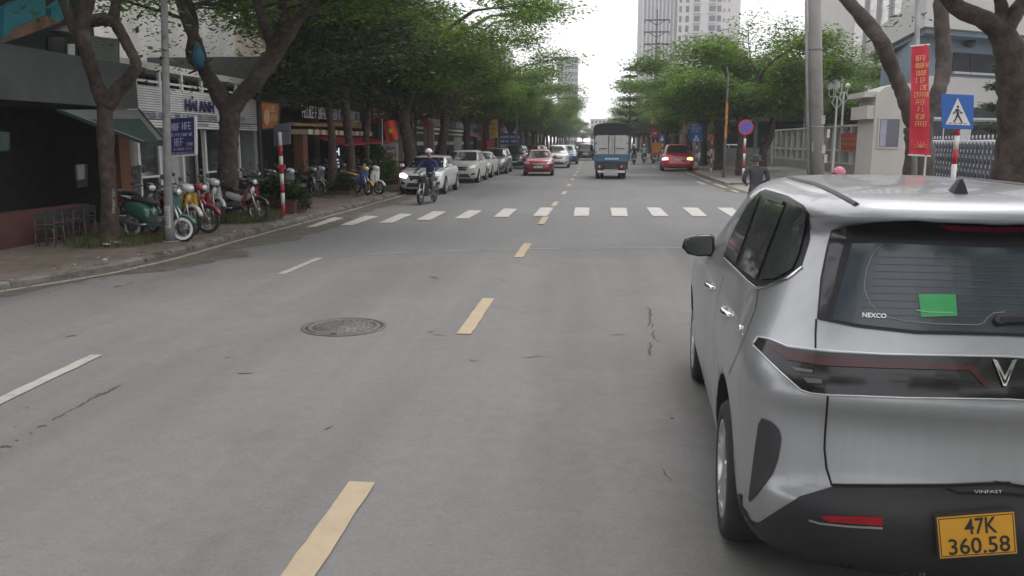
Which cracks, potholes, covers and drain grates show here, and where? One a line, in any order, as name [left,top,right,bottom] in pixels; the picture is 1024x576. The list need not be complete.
manhole cover [301,317,386,336]
crack [0,385,119,447]
crack [647,307,661,355]
